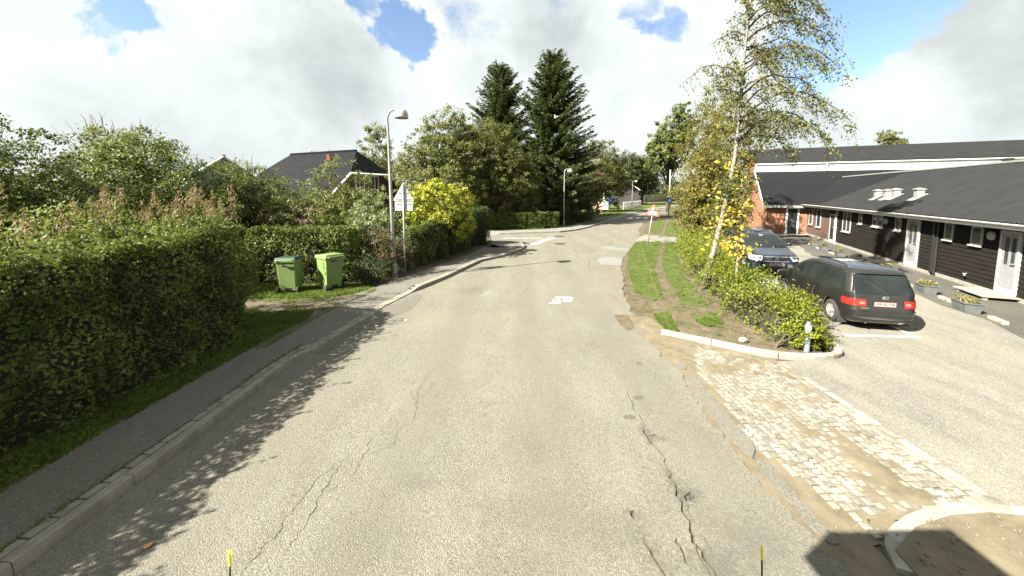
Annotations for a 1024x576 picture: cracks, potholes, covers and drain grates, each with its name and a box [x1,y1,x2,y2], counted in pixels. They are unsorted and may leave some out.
crack [241,357,440,574]
crack [628,394,716,576]
